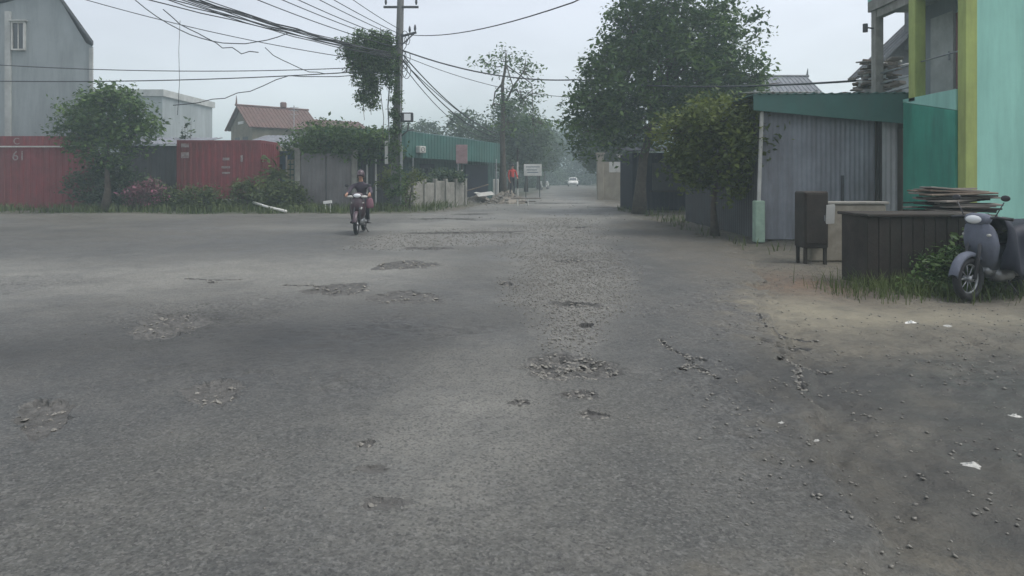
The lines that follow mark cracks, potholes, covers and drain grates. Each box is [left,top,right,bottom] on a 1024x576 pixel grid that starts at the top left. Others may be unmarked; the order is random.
pothole [509,350,632,383]
pothole [543,300,611,310]
pothole [346,493,429,515]
crack [752,313,833,392]
crack [655,339,719,379]
pothole [6,394,83,449]
pothole [346,437,384,451]
pothole [360,289,447,305]
pothole [172,376,253,412]
pothole [570,407,619,422]
pothole [294,282,374,297]
pothole [497,398,537,408]
